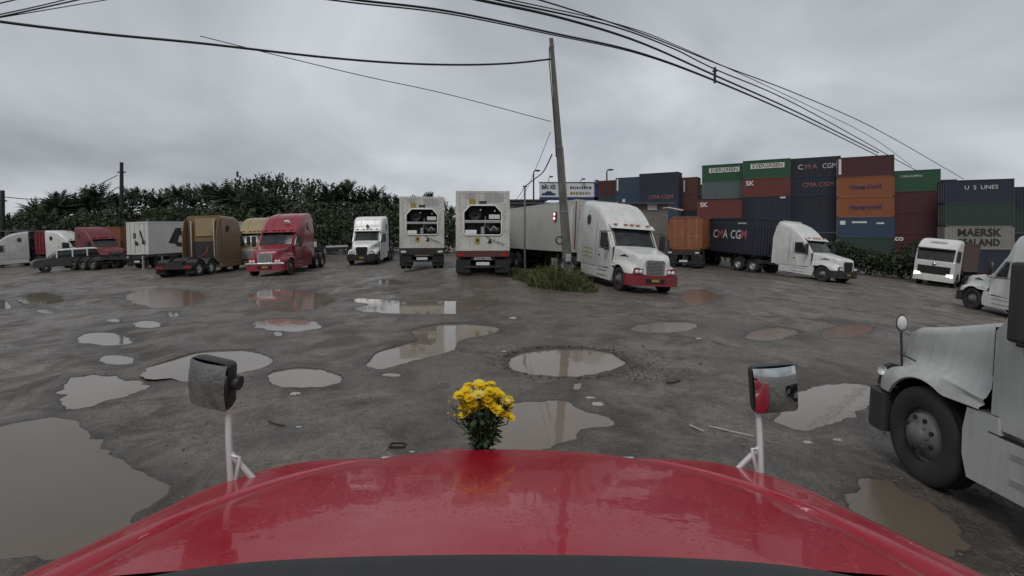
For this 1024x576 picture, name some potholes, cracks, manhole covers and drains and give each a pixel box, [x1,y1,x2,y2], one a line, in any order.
pothole [842,476,974,558]
pothole [75,332,134,345]
pothole [124,288,208,308]
pothole [140,349,273,381]
pothole [365,322,500,369]
pothole [820,324,874,338]
pothole [507,347,626,377]
pothole [348,298,497,314]
pothole [489,379,616,450]
pothole [744,327,799,341]
pothole [772,383,870,431]
pothole [266,367,343,388]
